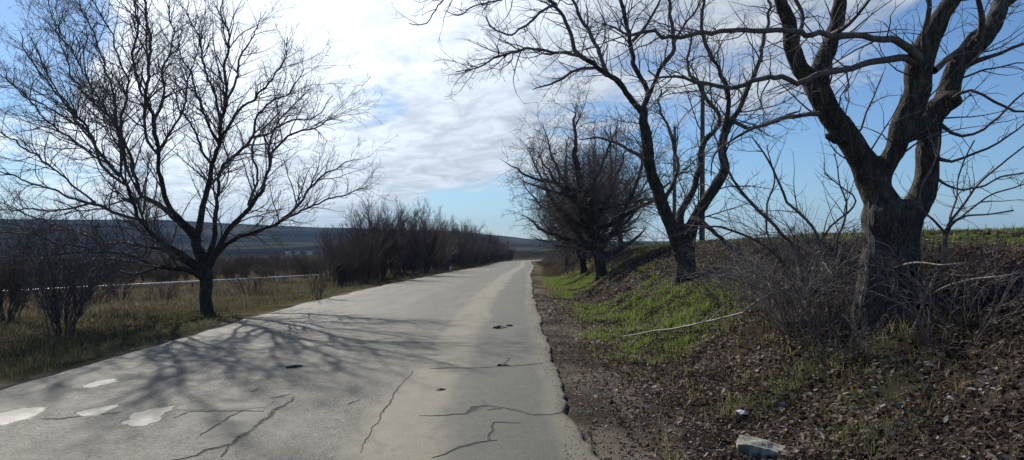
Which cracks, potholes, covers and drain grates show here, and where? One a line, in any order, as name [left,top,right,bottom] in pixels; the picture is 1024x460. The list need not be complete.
crack [172,388,294,460]
crack [419,399,566,458]
